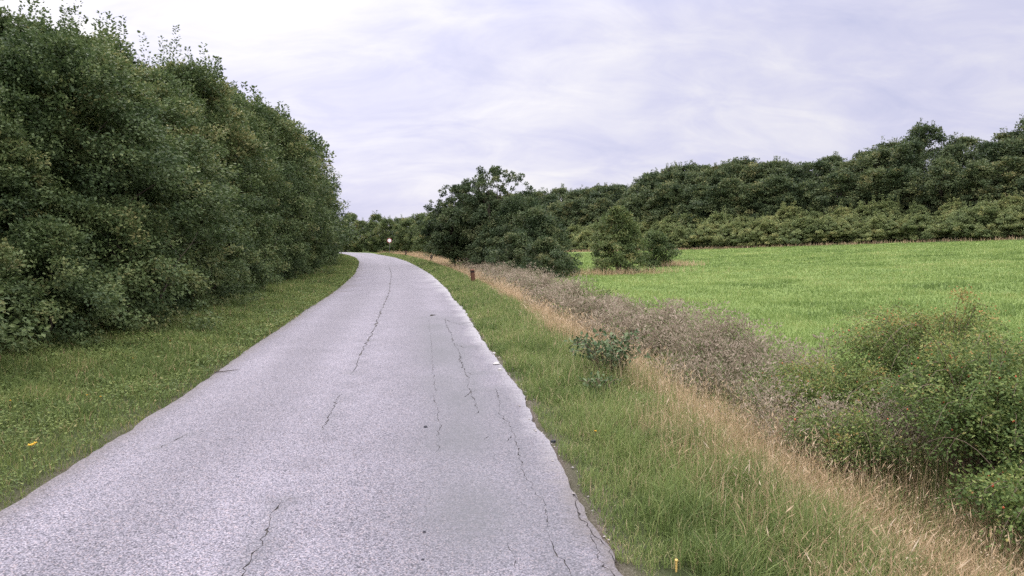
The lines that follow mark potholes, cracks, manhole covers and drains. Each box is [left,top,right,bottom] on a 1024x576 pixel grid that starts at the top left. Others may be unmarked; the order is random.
crack [353,268,392,371]
crack [486,391,571,574]
crack [428,320,479,453]
crack [573,494,615,576]
